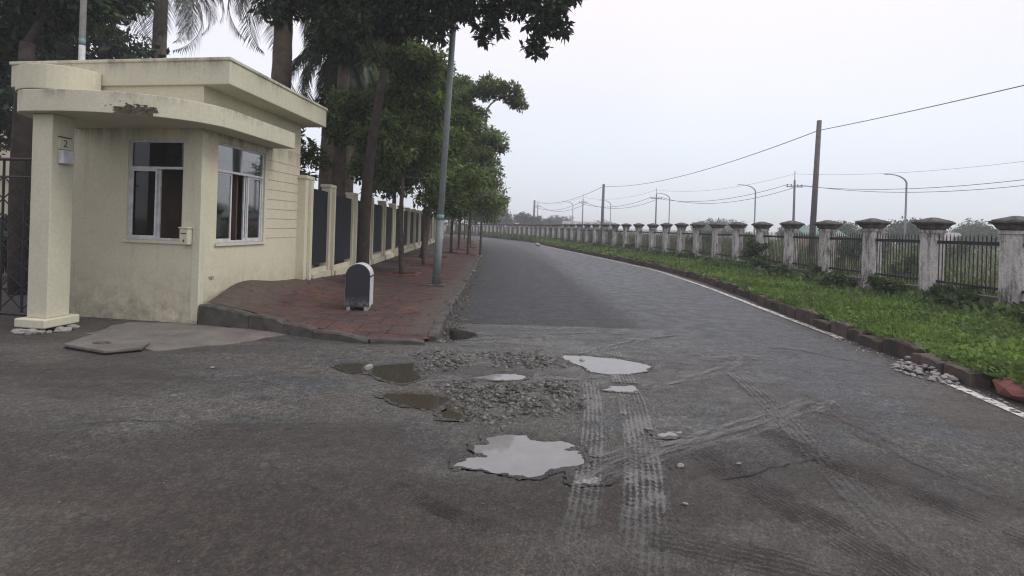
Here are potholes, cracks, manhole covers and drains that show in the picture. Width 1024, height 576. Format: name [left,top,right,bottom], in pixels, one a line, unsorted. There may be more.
crack [725,455,833,479]
pothole [559,354,654,376]
pothole [464,371,531,382]
pothole [438,328,479,341]
pothole [372,391,454,412]
pothole [329,361,369,375]
pothole [448,430,594,480]
pothole [598,383,647,393]
pothole [433,407,468,422]
pothole [367,362,425,386]
